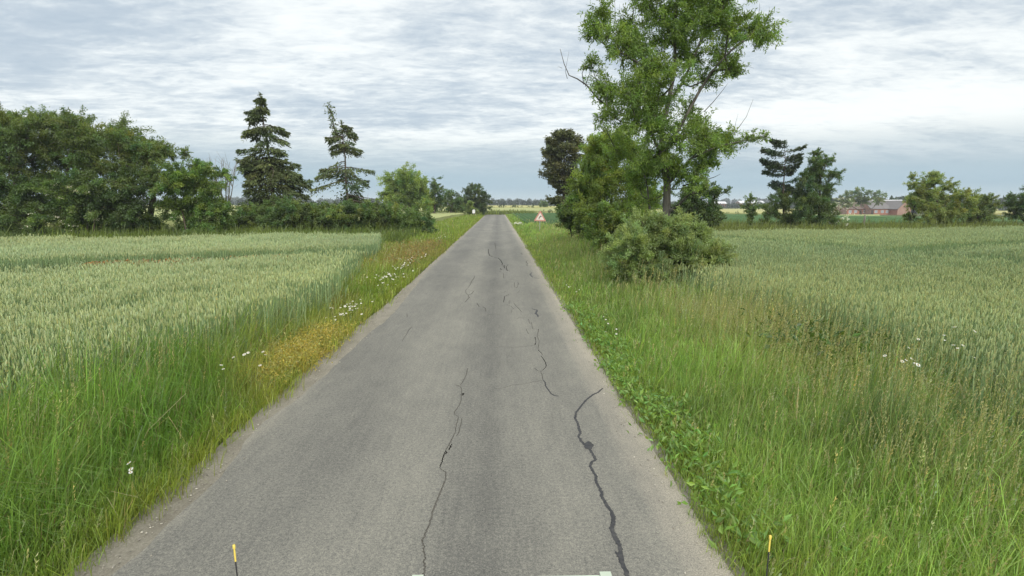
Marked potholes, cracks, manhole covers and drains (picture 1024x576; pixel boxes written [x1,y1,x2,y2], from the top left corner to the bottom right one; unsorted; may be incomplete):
crack [465,246,547,388]
crack [421,369,468,576]
